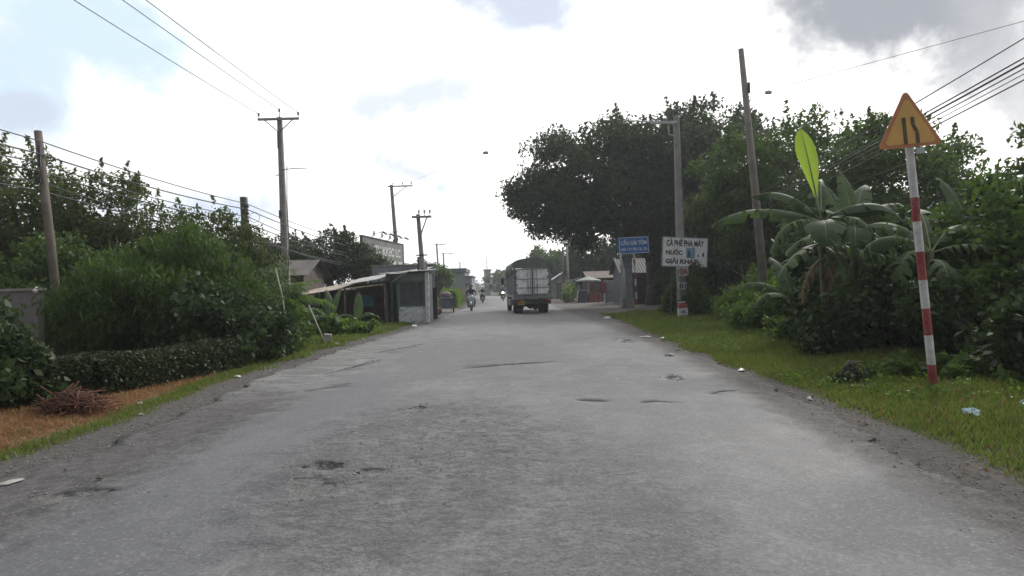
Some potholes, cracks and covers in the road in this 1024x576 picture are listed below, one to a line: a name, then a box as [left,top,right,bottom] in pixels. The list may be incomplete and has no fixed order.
pothole [301,461,344,471]
pothole [51,488,117,500]
pothole [353,468,385,476]
